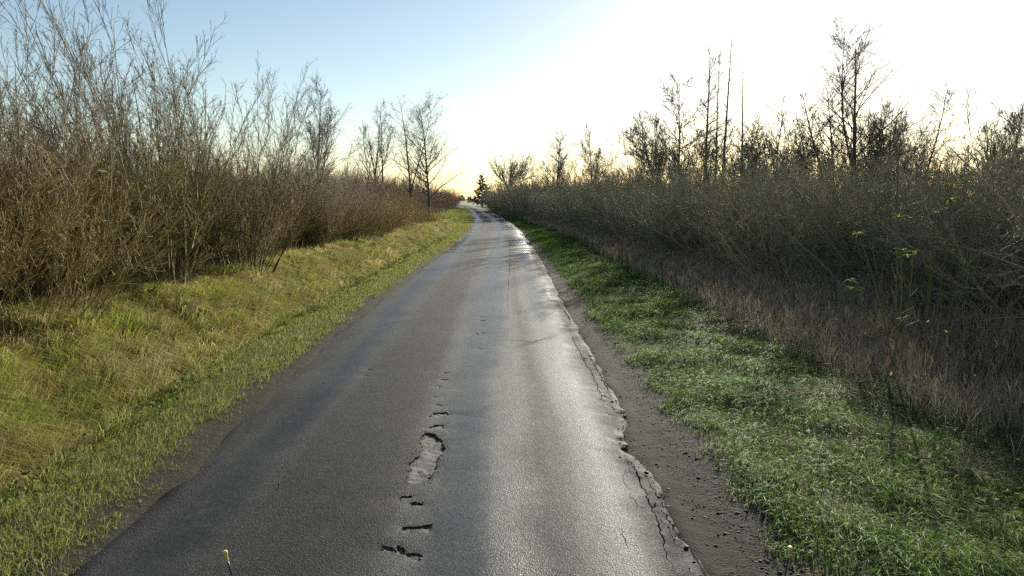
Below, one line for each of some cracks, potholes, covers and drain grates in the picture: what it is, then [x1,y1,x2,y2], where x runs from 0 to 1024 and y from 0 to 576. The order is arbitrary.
crack [623,456,678,569]
pothole [401,524,432,533]
pothole [406,433,446,484]
